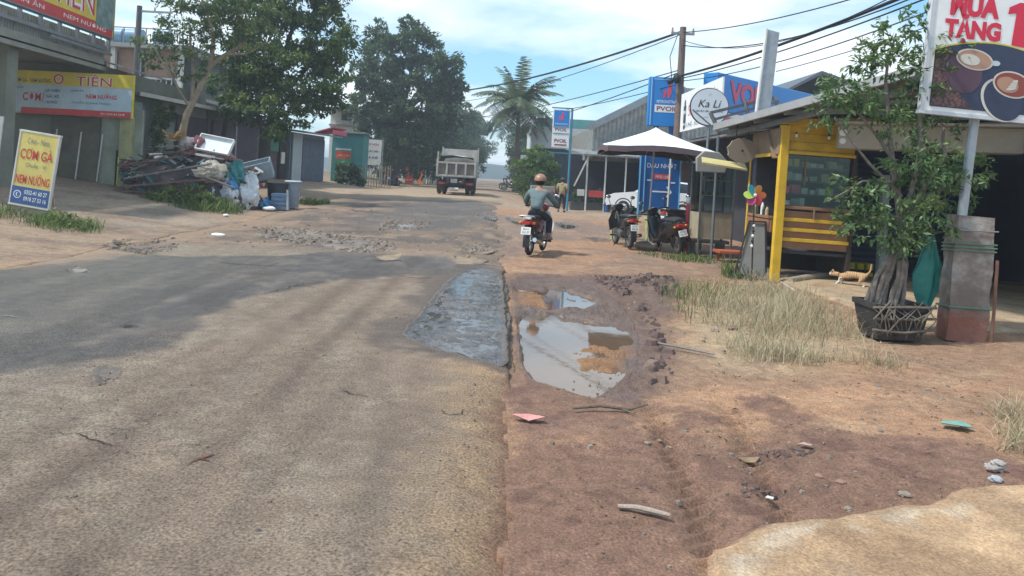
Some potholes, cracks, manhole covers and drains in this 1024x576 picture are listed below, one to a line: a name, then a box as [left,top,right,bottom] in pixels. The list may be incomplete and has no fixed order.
pothole [105,238,179,255]
pothole [89,365,124,386]
pothole [257,226,397,253]
crack [55,417,154,445]
pothole [508,276,641,399]
pothole [379,220,431,231]
